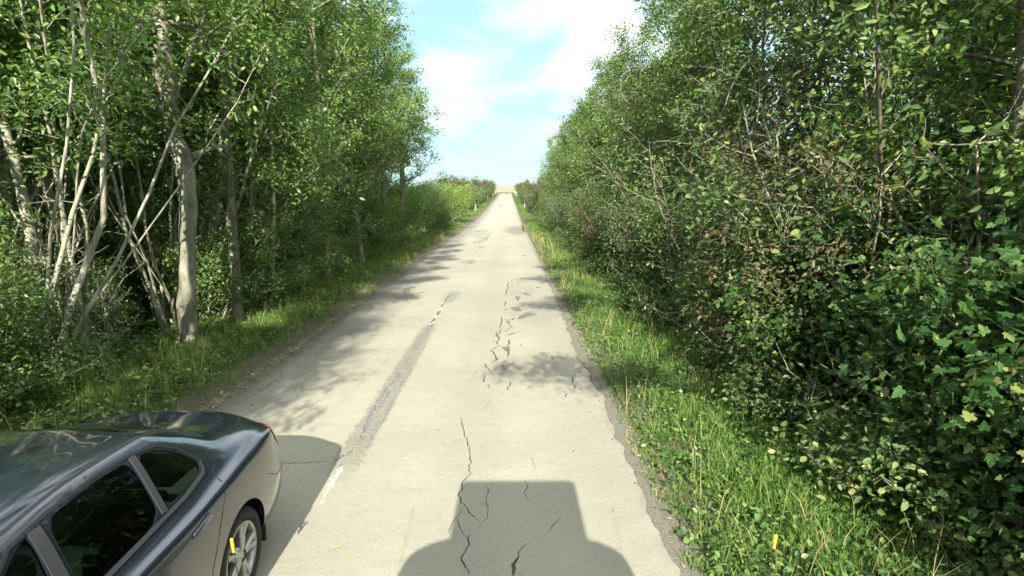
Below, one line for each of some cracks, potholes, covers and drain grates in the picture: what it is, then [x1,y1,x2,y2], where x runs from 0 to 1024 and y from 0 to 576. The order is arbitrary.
crack [449,282,515,574]
crack [511,543,528,576]
